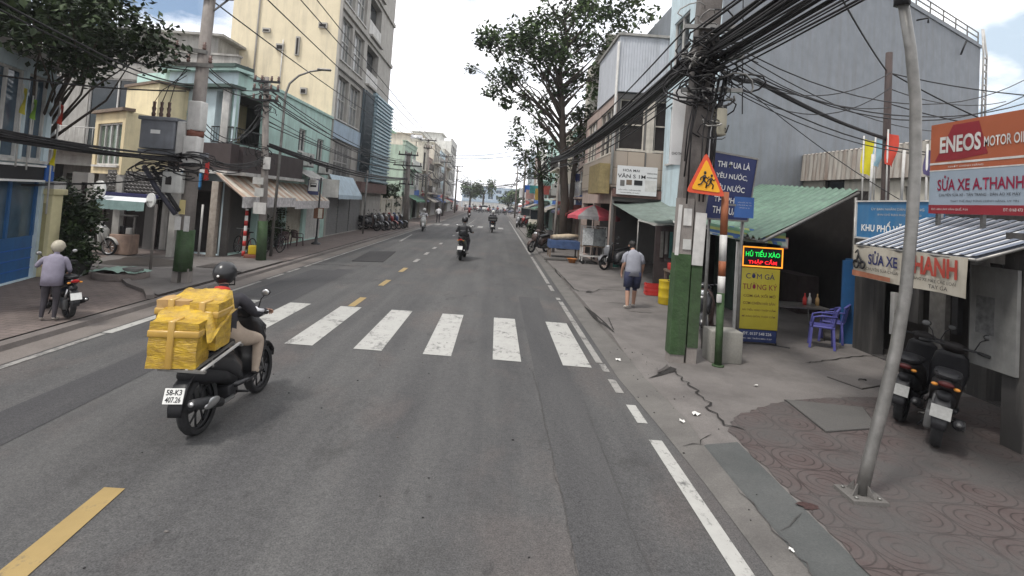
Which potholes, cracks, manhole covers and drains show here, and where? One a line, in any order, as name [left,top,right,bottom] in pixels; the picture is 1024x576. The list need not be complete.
manhole cover [828,374,881,390]
crack [584,289,651,332]
manhole cover [784,399,872,433]
crack [675,371,745,446]
